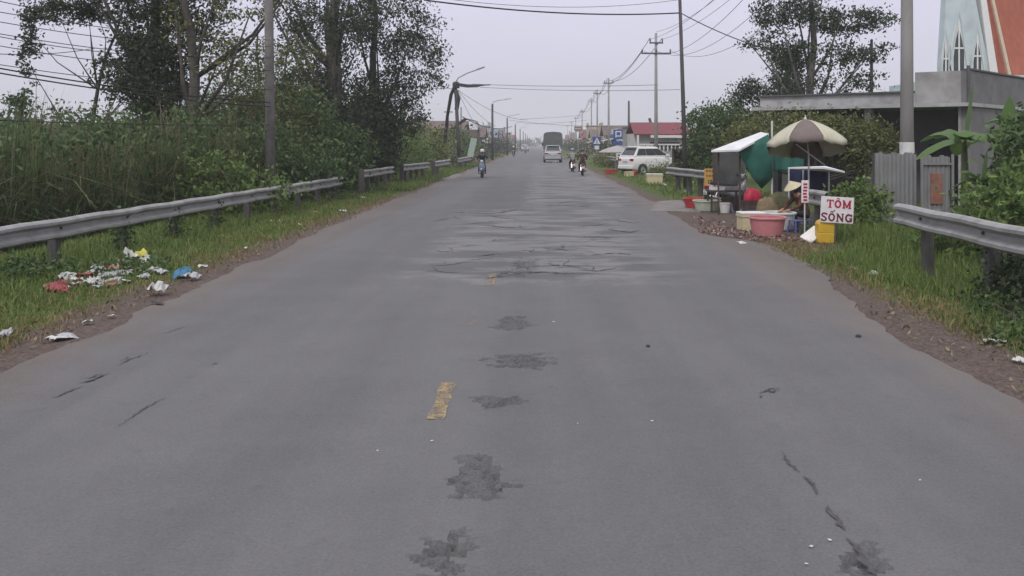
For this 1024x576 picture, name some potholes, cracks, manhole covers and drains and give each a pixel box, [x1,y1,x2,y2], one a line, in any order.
pothole [487,316,537,331]
crack [54,327,181,397]
pothole [465,395,529,410]
pothole [405,526,481,576]
crack [432,201,639,279]
pothole [478,352,560,371]
pothole [835,540,895,576]
pothole [442,453,523,501]
crack [782,451,877,576]
